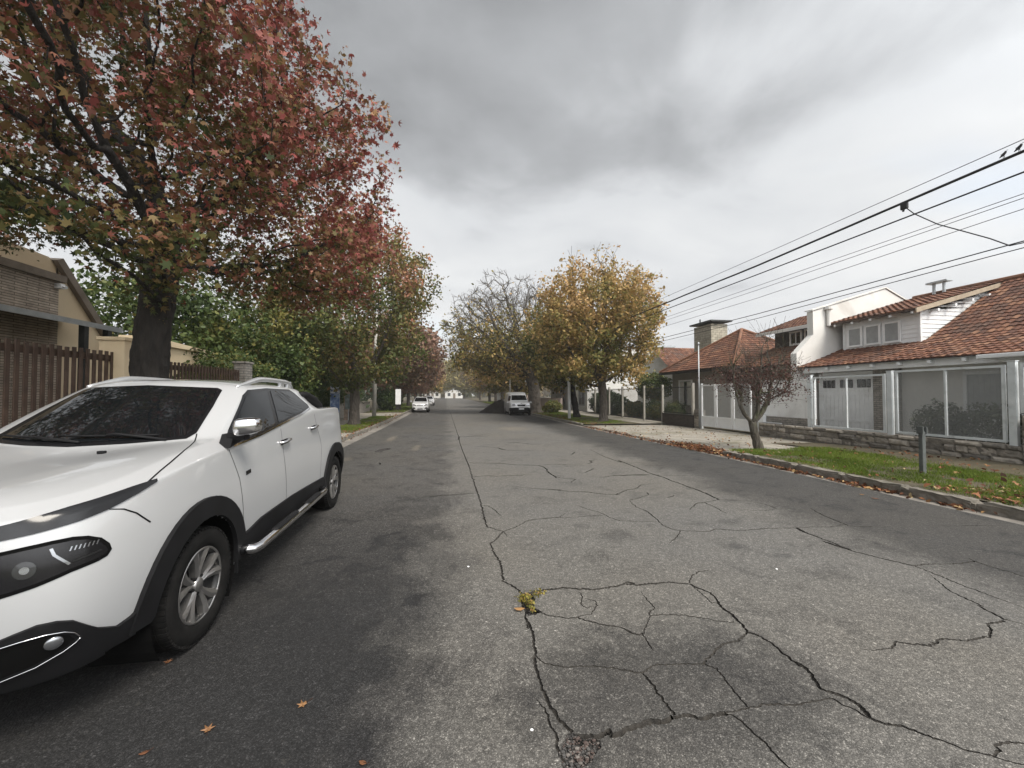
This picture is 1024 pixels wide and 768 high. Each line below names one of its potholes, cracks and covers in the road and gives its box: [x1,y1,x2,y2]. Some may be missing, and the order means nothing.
crack [401,407,1024,768]
pothole [558,733,601,768]
